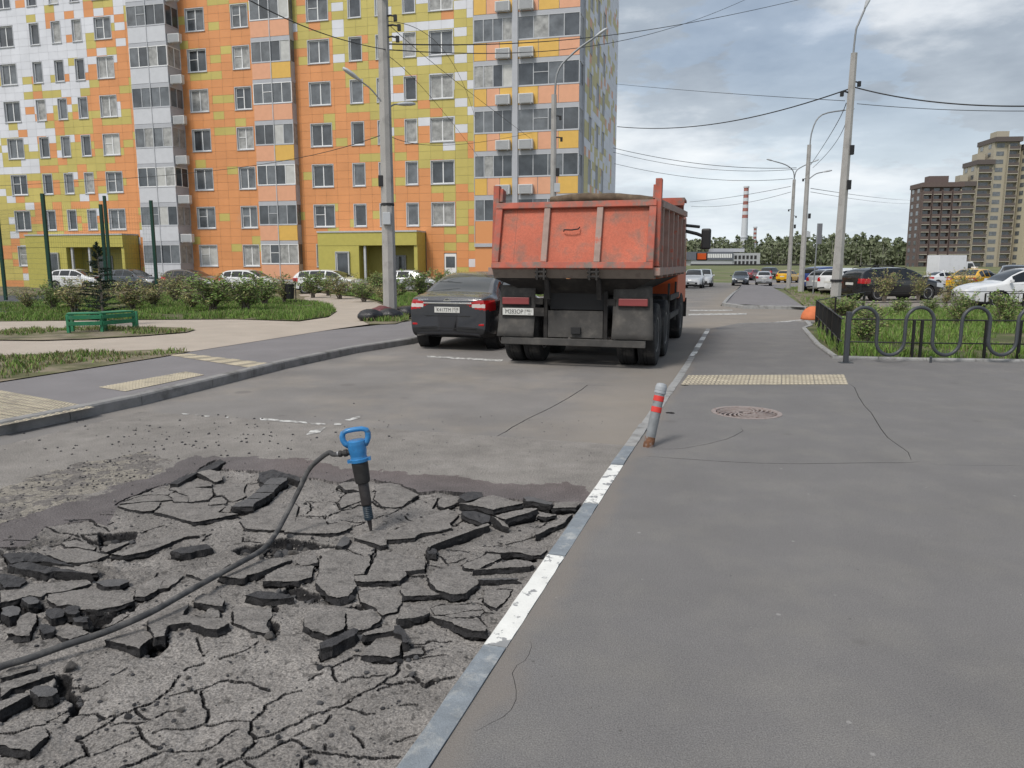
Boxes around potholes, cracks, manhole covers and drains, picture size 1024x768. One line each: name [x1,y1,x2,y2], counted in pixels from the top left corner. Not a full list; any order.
pothole [284,539,334,551]
pothole [56,675,81,718]
crack [498,385,588,436]
manhole cover [711,406,782,419]
pothole [89,606,136,633]
pothole [82,533,137,547]
pothole [236,540,300,558]
pothole [286,588,321,602]
crack [0,481,547,768]
crack [854,387,911,459]
